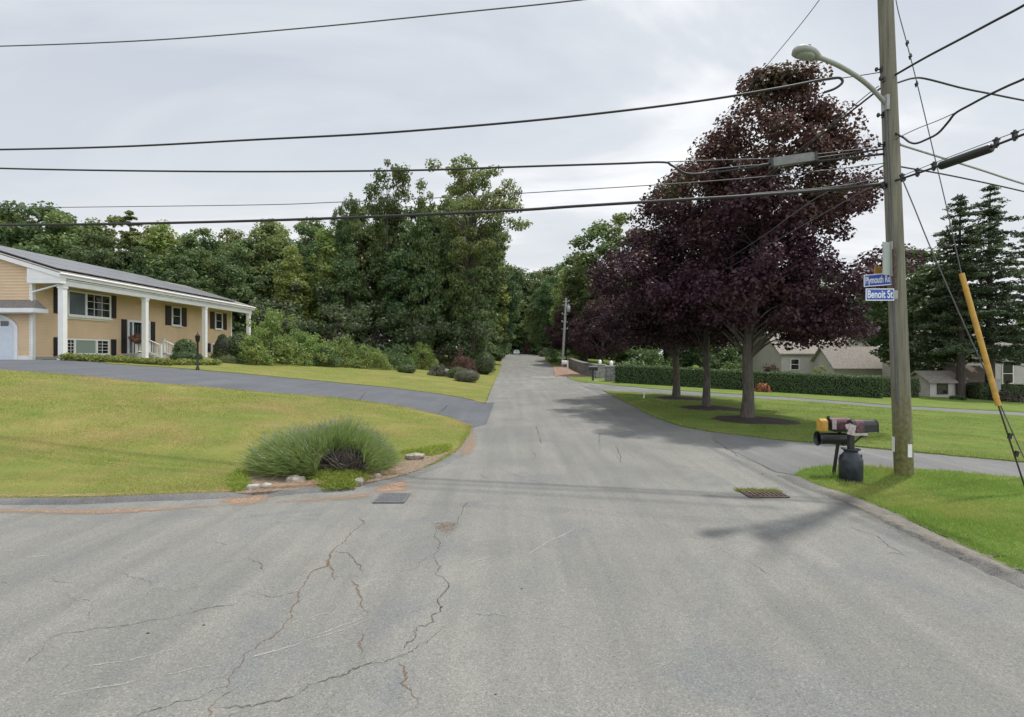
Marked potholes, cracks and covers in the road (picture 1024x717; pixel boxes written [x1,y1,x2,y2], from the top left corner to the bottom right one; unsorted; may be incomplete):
drain grate [738,490,790,498]
crack [138,504,466,716]
